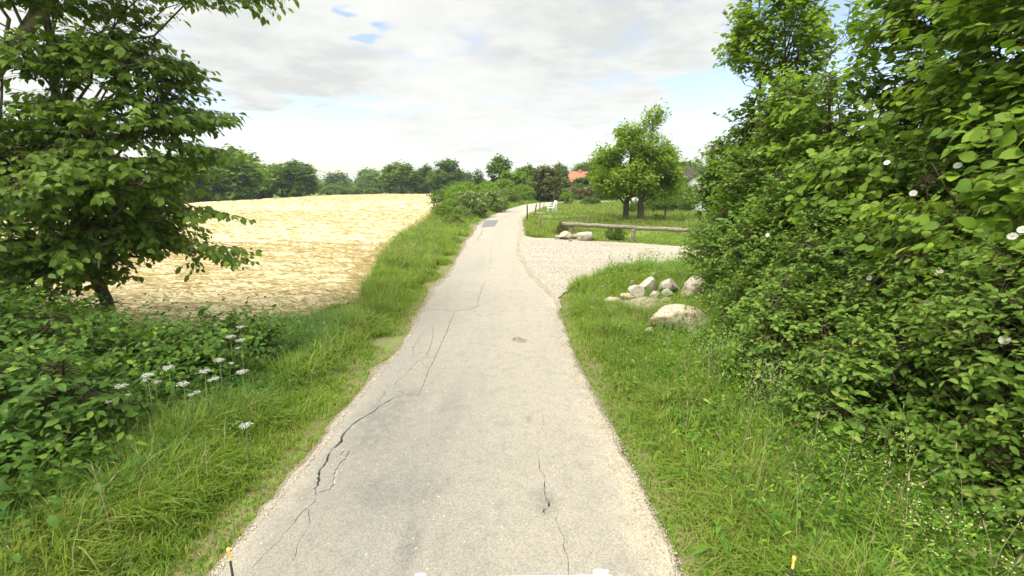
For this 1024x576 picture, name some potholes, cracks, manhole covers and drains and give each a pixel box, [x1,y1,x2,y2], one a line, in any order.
crack [379,289,482,402]
crack [537,454,569,575]
